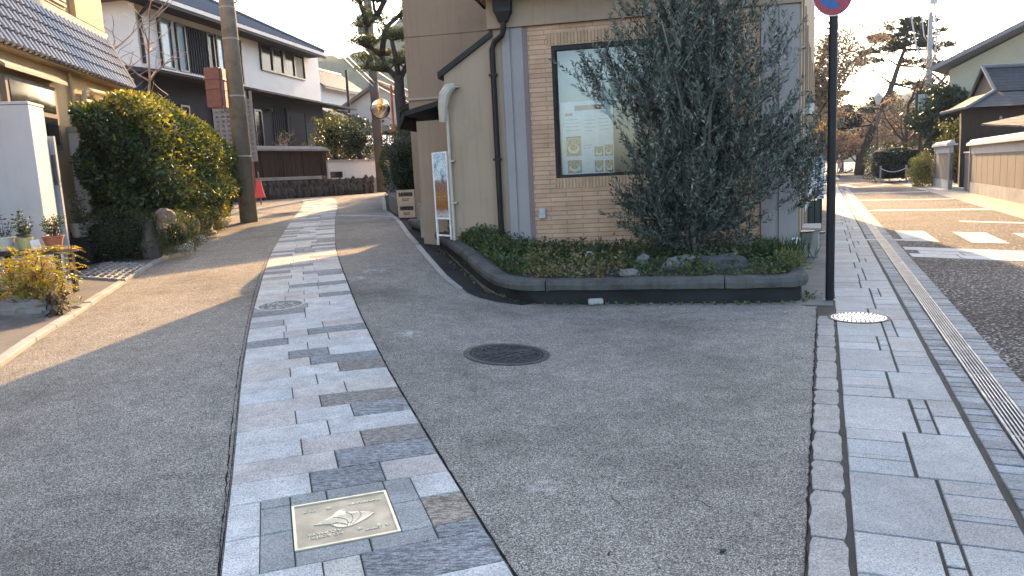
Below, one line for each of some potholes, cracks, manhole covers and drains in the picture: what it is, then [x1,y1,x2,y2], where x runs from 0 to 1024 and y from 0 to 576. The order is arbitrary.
manhole cover [463,343,550,366]
drain grate [844,191,1024,457]
manhole cover [256,300,305,311]
manhole cover [828,312,890,324]
